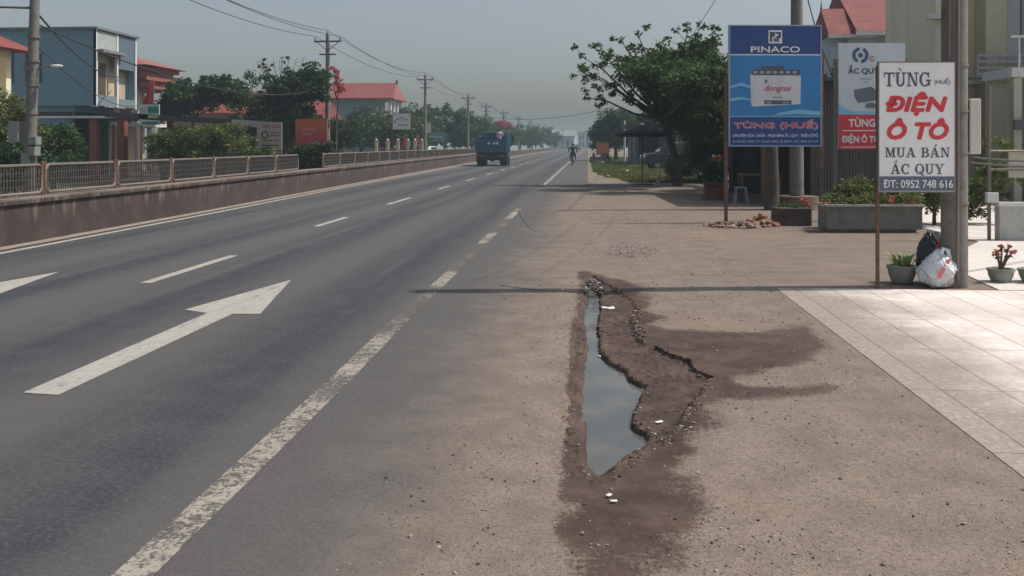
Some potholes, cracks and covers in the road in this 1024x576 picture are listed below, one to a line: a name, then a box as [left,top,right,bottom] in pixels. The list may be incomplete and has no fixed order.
crack [651,346,713,380]
pothole [561,275,712,485]
